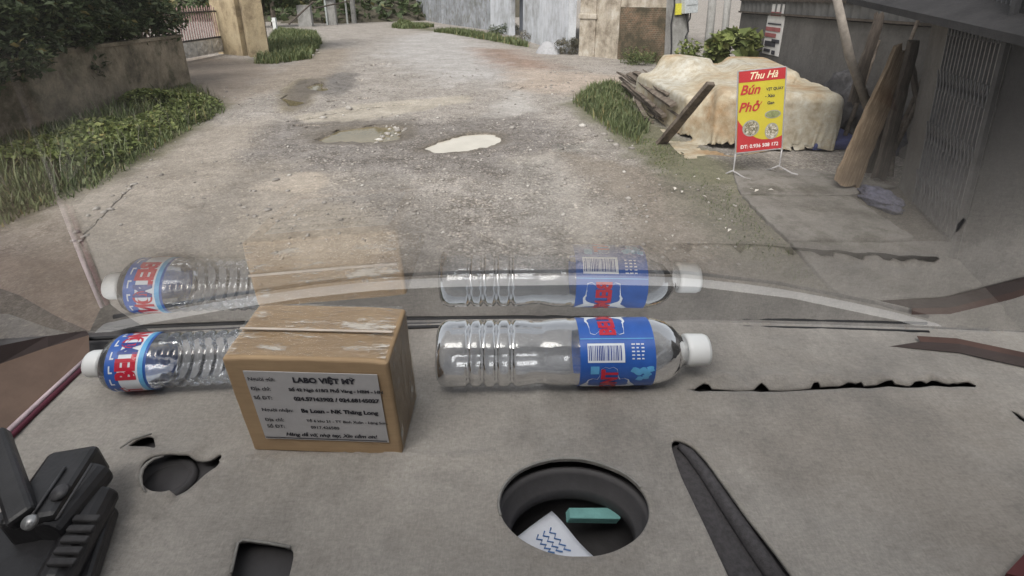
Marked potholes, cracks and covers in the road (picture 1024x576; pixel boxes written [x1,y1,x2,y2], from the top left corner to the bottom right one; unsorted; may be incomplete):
pothole [291,120,426,149]
pothole [263,76,347,116]
crack [82,185,133,240]
